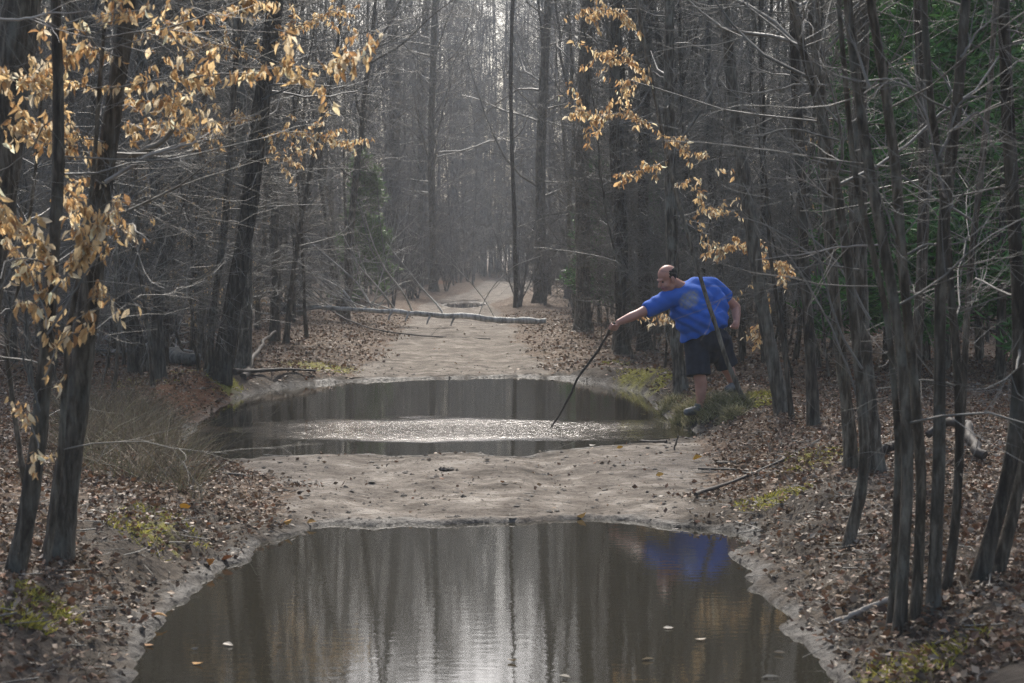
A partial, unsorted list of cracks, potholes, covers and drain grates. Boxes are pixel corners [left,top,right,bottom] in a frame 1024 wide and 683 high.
pothole [441,300,489,308]
